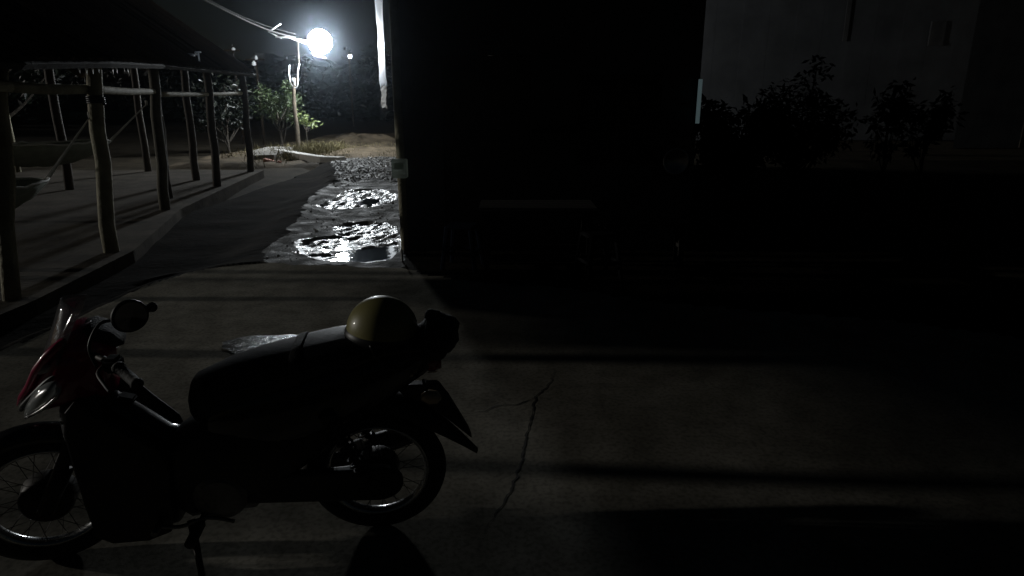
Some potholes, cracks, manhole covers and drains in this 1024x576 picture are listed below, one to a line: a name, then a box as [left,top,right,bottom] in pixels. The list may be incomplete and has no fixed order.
crack [474,373,554,526]
